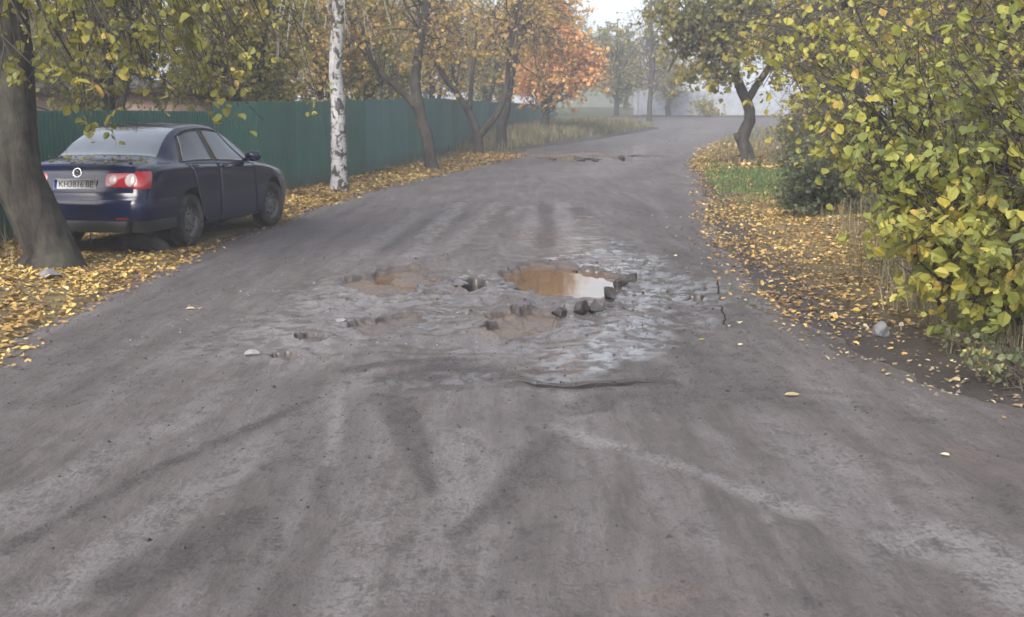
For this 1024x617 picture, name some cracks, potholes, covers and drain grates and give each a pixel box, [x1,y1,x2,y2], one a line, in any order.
pothole [466,304,583,344]
crack [702,278,744,332]
pothole [521,150,641,162]
crack [493,376,678,394]
pothole [483,260,647,302]
pothole [322,262,468,304]
